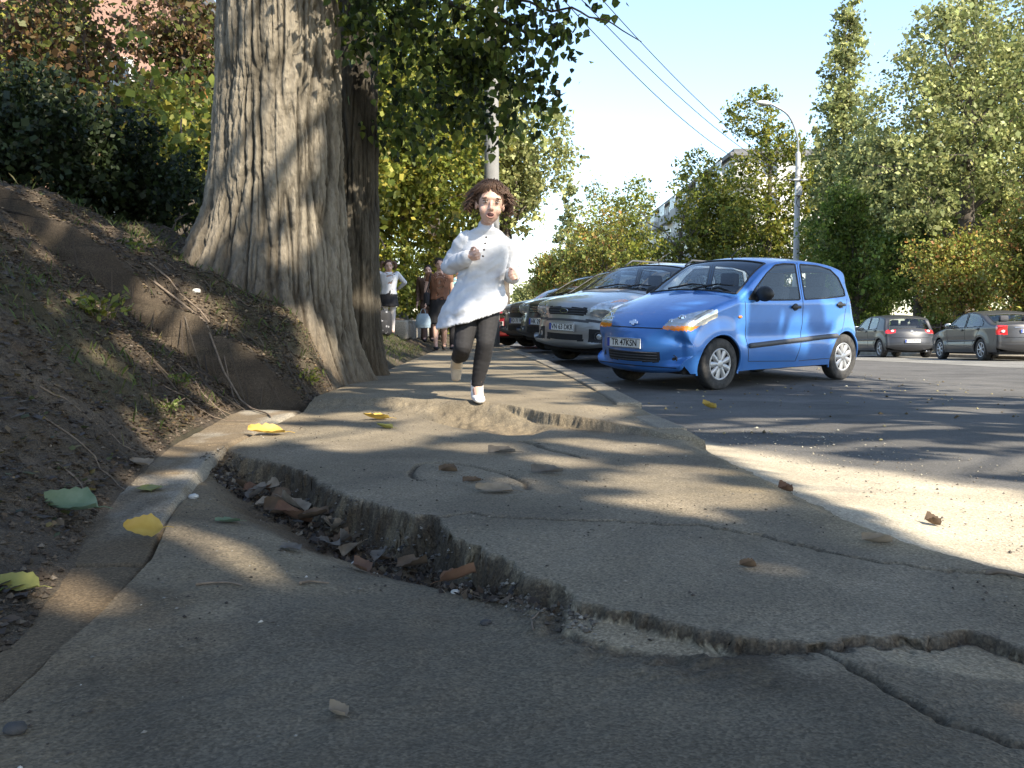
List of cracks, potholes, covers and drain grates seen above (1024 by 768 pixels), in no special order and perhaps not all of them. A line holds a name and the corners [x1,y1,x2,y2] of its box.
crack [521,569,1024,750]
pothole [198,446,578,616]
